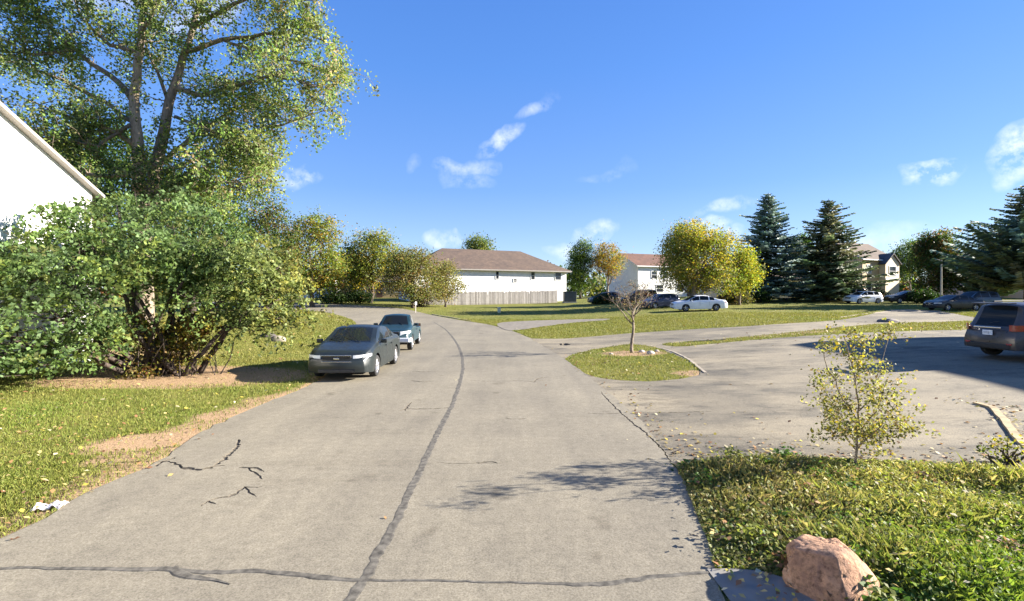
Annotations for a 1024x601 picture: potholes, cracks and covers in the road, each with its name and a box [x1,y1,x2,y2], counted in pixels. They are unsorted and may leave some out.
crack [143,440,264,506]
